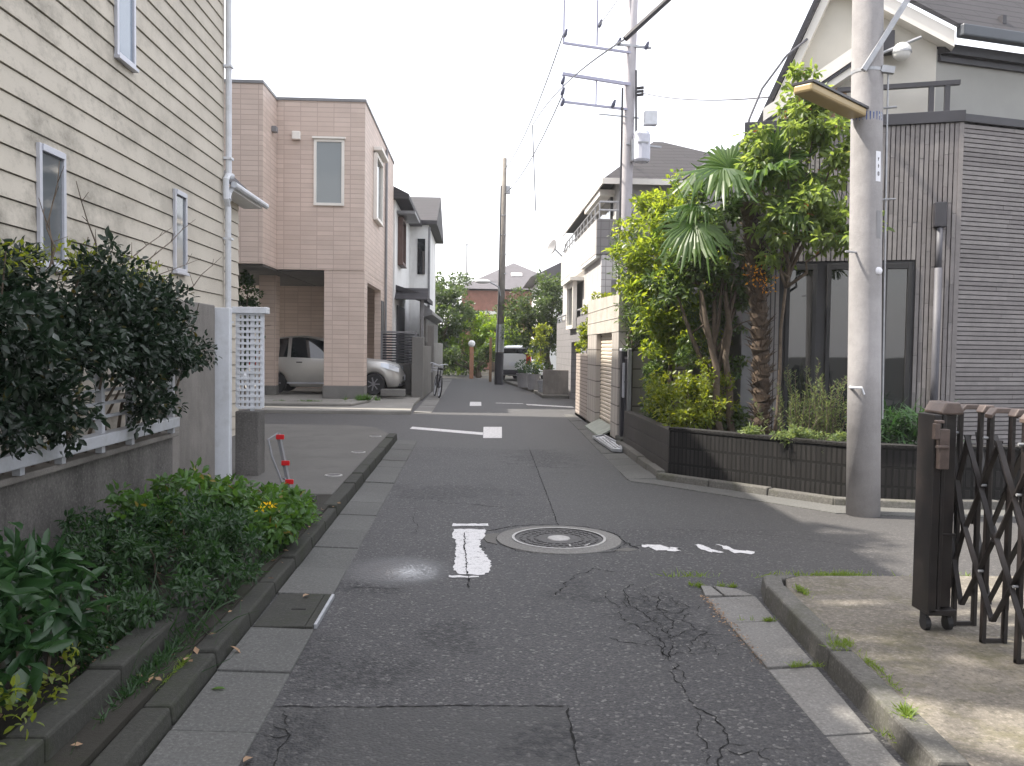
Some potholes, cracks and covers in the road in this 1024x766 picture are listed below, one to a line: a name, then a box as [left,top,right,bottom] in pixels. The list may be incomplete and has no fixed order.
manhole cover [497,525,621,554]
crack [270,709,292,766]
crack [605,584,797,766]
